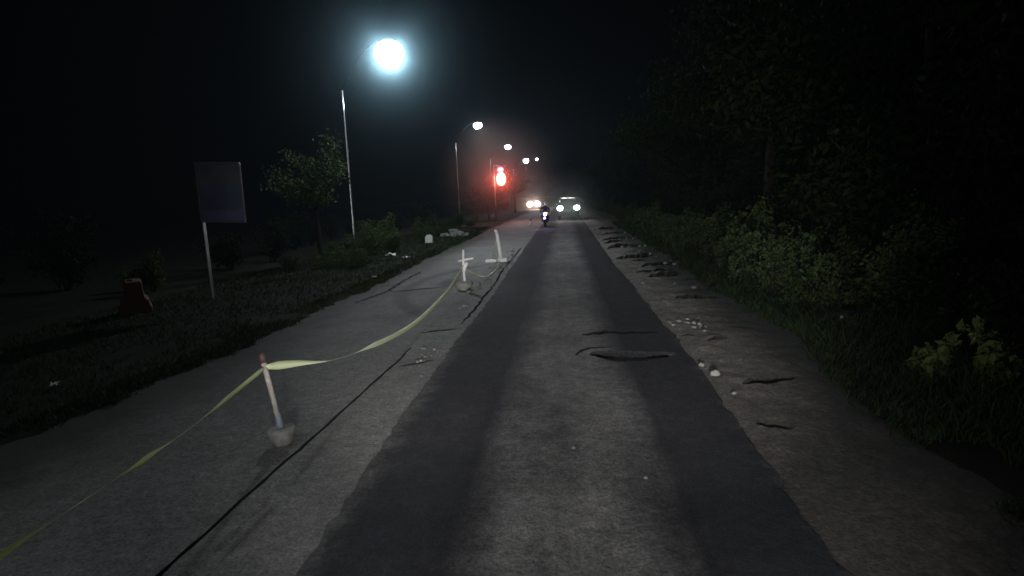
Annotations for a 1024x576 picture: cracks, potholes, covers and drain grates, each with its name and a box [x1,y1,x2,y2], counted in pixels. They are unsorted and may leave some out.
pothole [742,374,799,384]
crack [576,330,658,355]
pothole [588,350,676,362]
crack [156,247,522,576]
